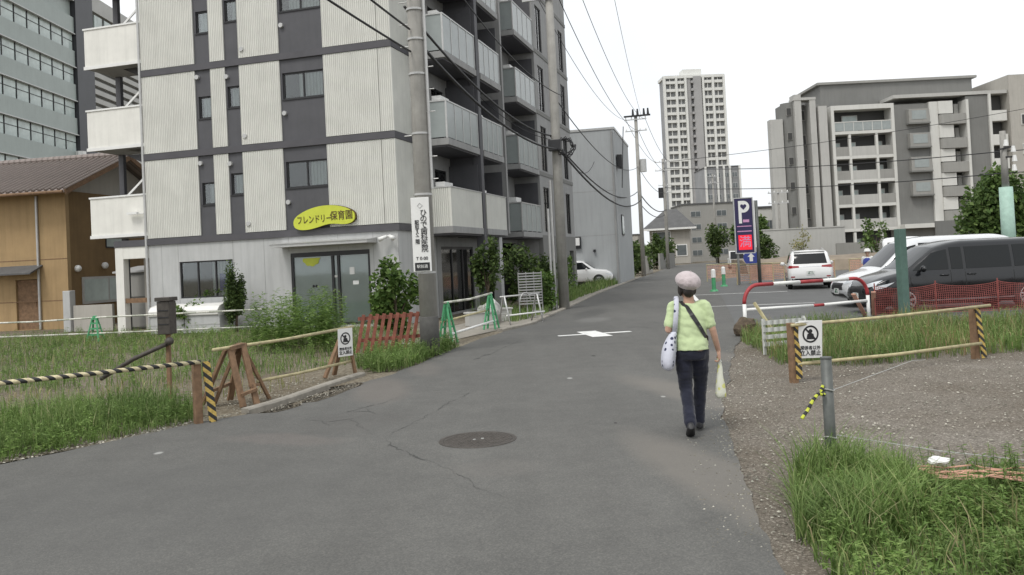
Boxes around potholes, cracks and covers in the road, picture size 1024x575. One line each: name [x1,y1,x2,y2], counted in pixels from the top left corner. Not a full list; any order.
manhole cover [439,431,517,448]
crack [307,380,497,493]
